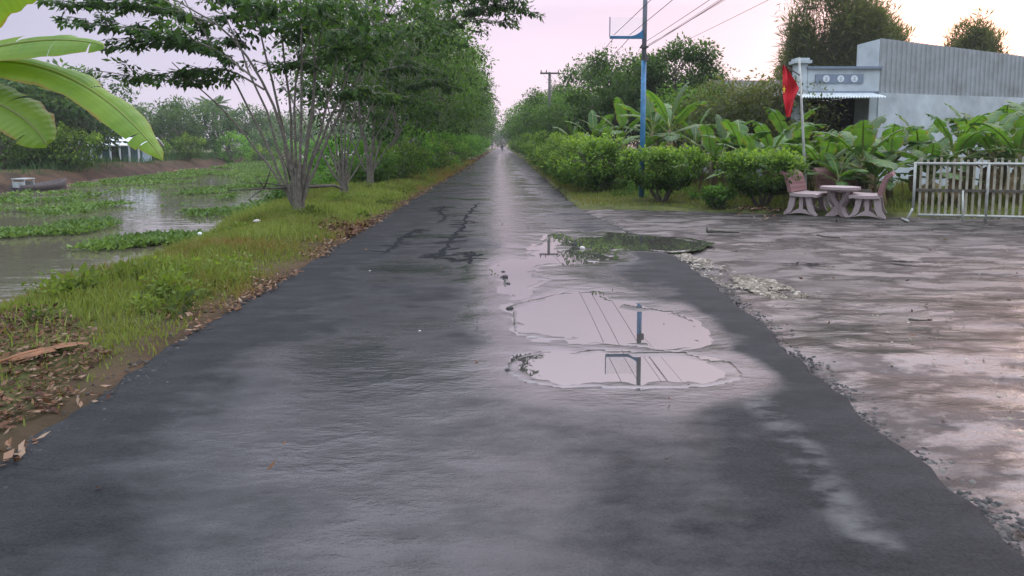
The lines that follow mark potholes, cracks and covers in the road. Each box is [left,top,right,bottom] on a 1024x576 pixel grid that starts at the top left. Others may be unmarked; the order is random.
crack [377,202,487,264]
pothole [567,232,716,261]
pothole [498,291,714,352]
pothole [508,349,743,390]
